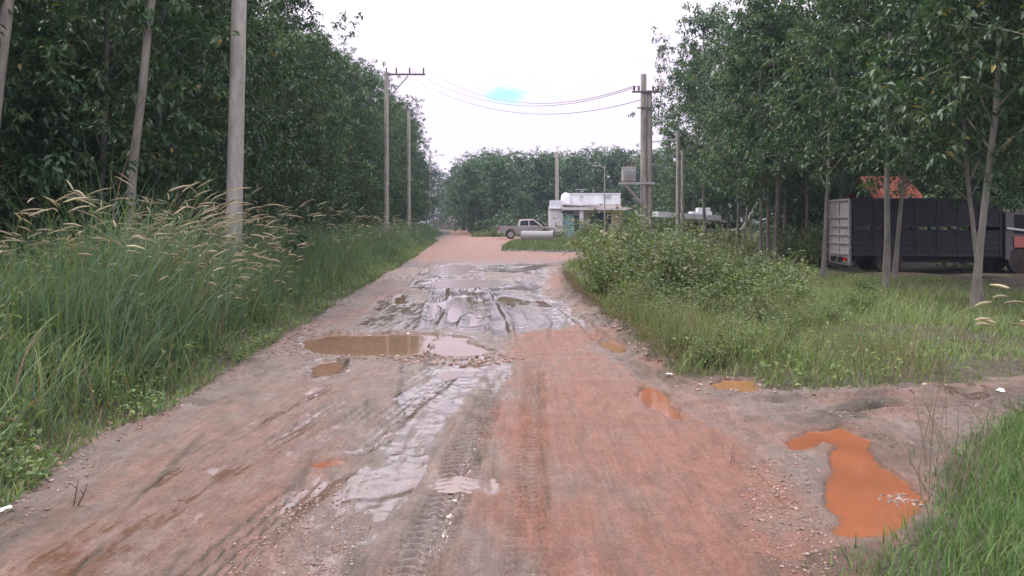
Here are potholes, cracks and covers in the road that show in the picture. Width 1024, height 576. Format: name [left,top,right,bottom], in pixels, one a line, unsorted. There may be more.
pothole [627,380,701,423]
pothole [300,356,353,378]
pothole [590,334,637,354]
pothole [296,329,504,358]
pothole [701,376,772,393]
pothole [774,417,942,546]
pothole [389,294,411,305]
pothole [421,278,509,289]
